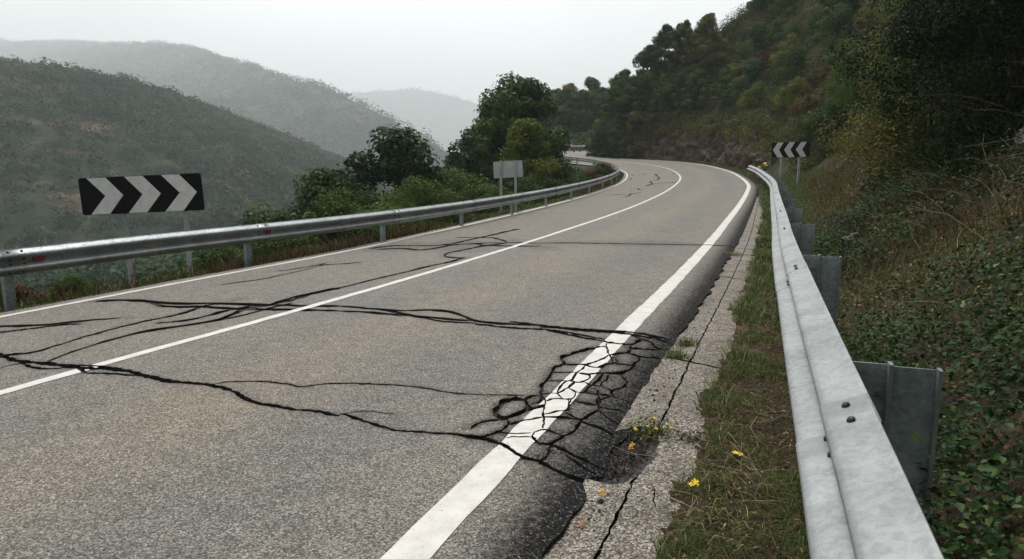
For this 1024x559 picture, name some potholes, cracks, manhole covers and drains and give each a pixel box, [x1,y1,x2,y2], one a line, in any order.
crack [619,172,674,197]
crack [0,229,734,508]
